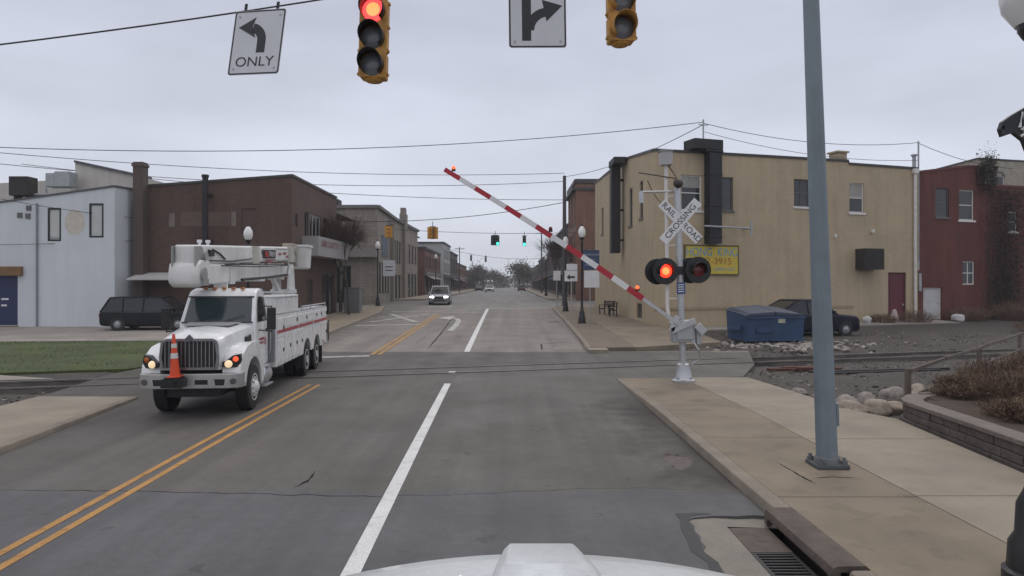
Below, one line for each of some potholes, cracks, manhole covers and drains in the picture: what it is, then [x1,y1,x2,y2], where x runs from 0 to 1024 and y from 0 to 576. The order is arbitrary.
crack [777,462,853,484]
drain grate [729,507,868,576]
